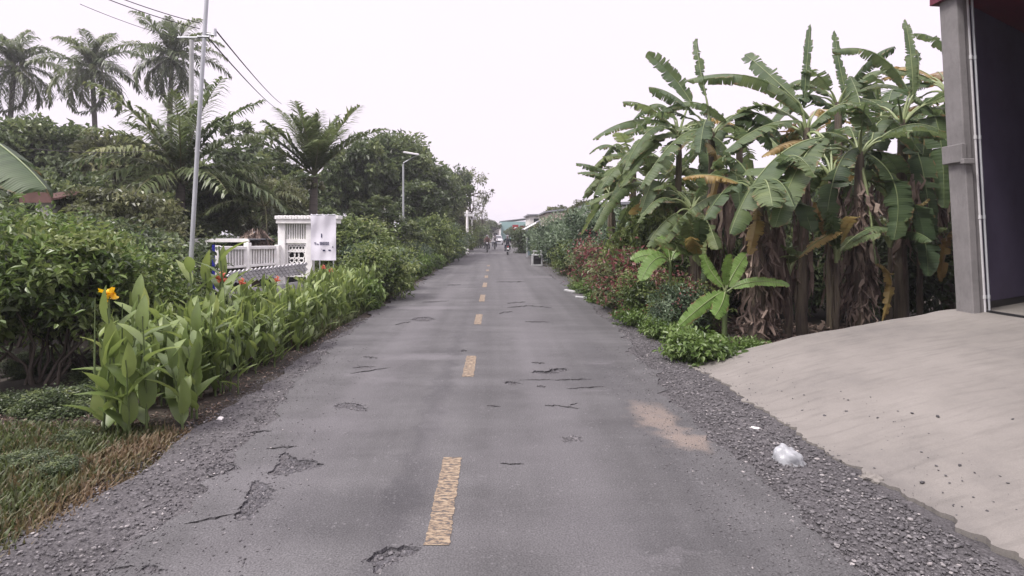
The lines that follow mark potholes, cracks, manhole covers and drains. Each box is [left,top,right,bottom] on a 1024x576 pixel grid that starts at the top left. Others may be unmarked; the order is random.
crack [350,356,390,374]
pothole [229,477,281,521]
crack [528,362,605,409]
pothole [361,543,422,576]
pothole [261,452,325,478]
crack [499,302,551,323]
pothole [335,402,368,411]
